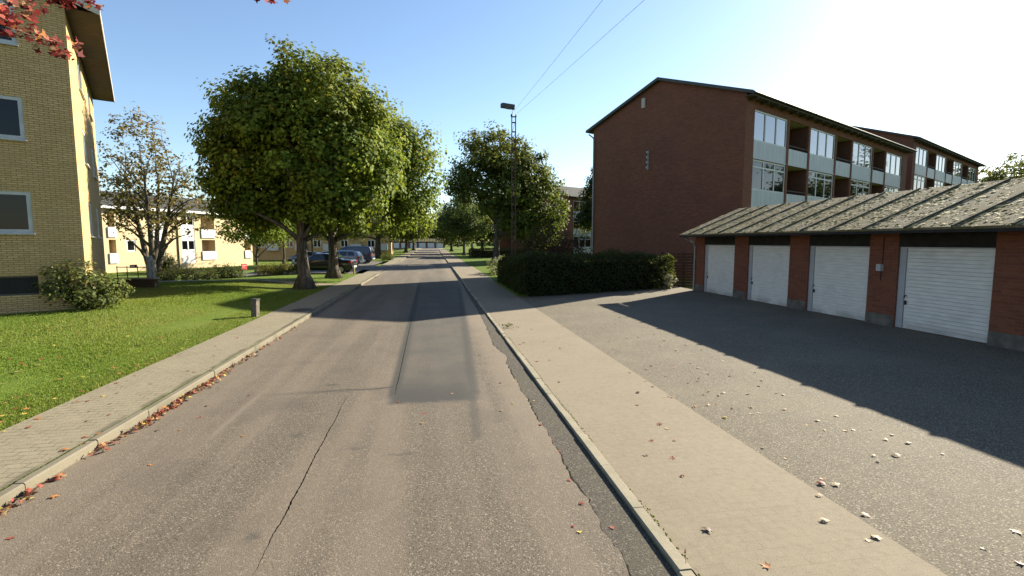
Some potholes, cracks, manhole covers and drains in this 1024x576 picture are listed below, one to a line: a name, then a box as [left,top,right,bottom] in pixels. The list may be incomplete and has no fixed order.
crack [254,319,412,573]
